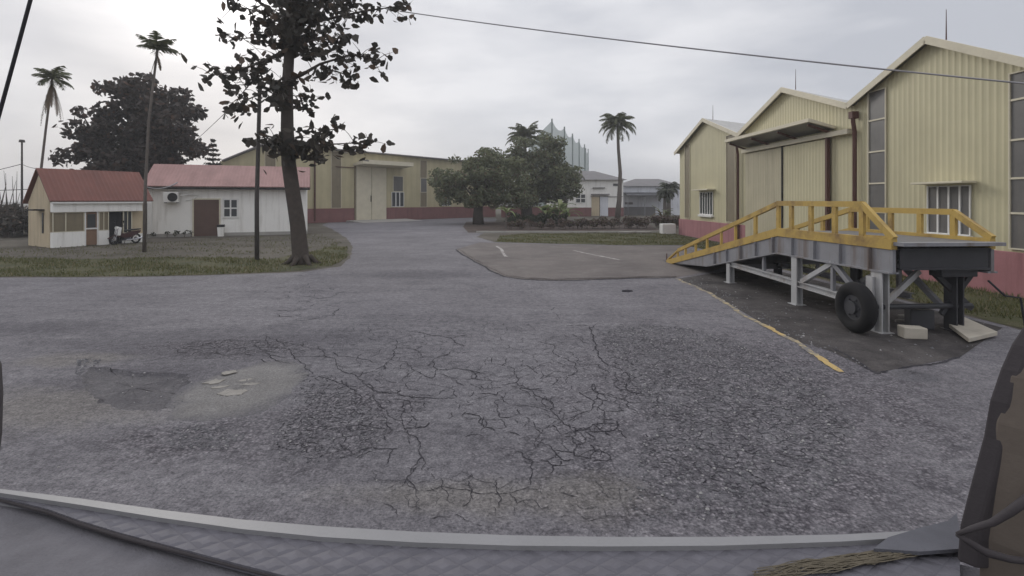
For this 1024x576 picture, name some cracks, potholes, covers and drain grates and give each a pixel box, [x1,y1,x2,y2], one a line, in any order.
crack [265,282,345,321]
pothole [81,367,191,411]
crack [174,307,849,526]
